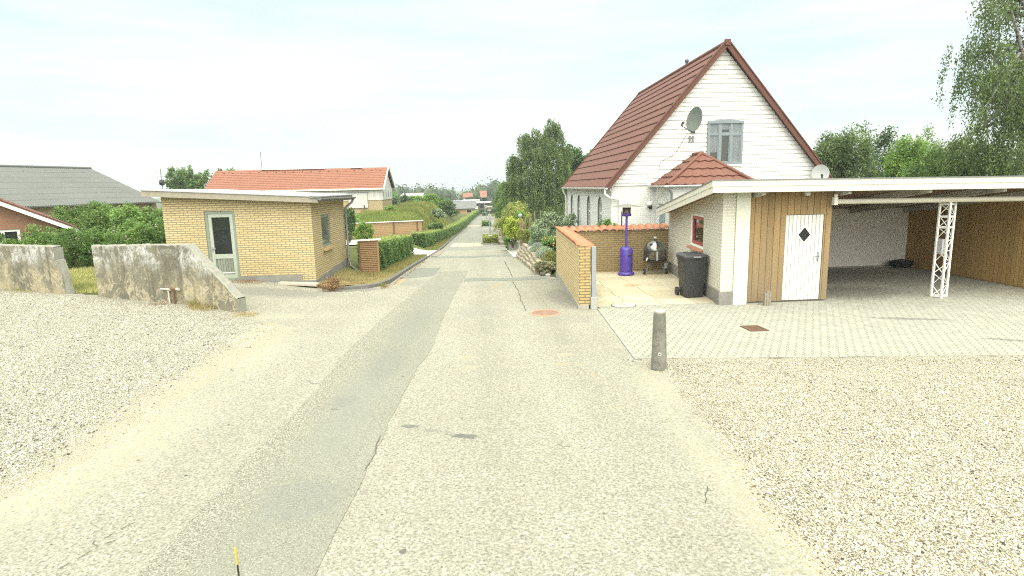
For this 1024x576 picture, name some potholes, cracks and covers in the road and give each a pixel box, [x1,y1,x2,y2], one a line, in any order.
manhole cover [529,309,561,317]
